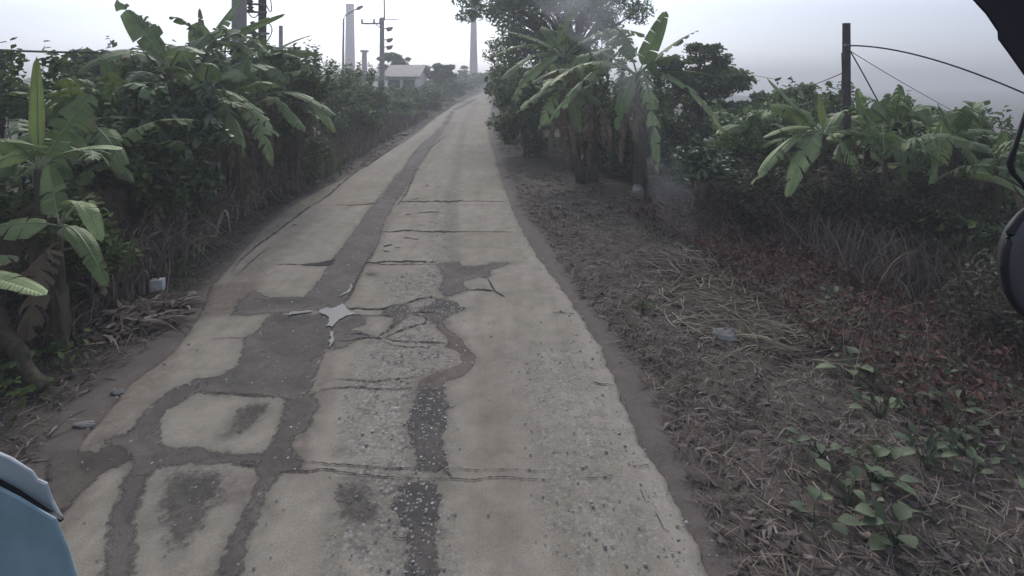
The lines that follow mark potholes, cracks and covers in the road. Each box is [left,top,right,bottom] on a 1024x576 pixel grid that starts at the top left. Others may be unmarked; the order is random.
crack [339,237,444,348]
crack [286,461,557,480]
